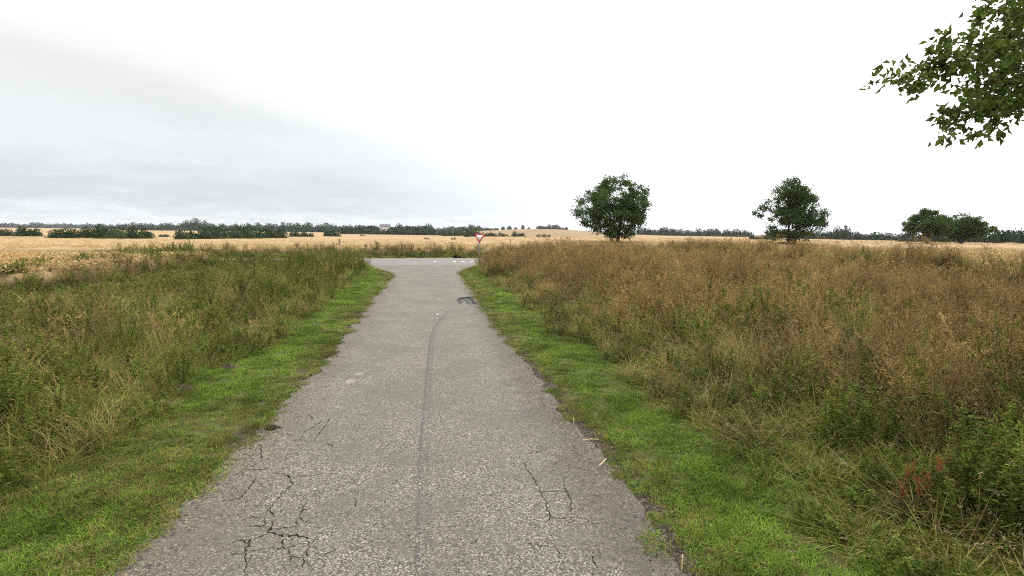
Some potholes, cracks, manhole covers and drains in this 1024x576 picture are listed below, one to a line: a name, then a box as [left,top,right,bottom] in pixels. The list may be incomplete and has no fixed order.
crack [524,448,585,521]
crack [226,414,336,575]
